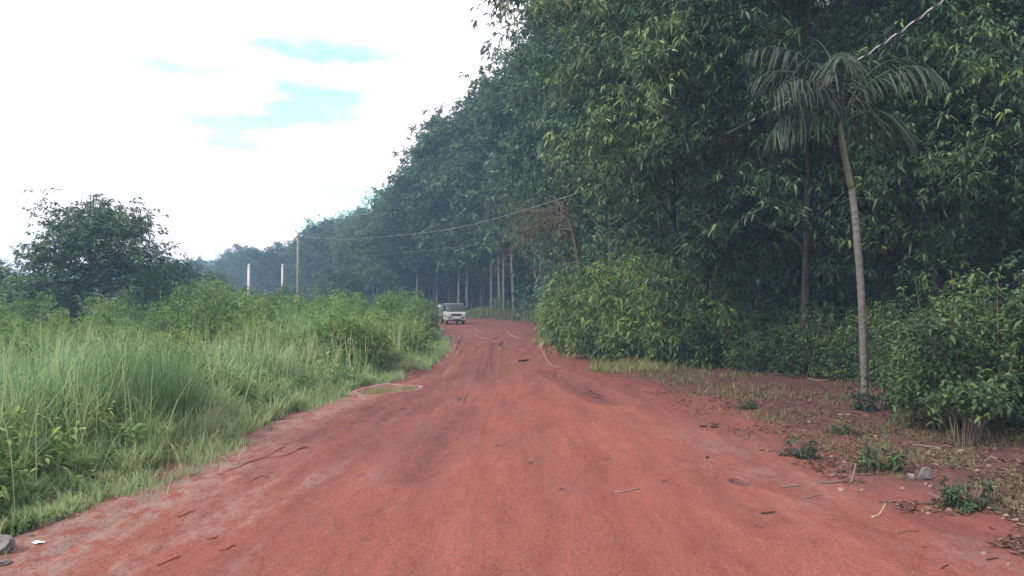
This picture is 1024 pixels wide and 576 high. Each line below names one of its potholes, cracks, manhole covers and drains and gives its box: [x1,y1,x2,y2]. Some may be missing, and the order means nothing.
pothole [353,383,423,396]
pothole [727,478,753,486]
